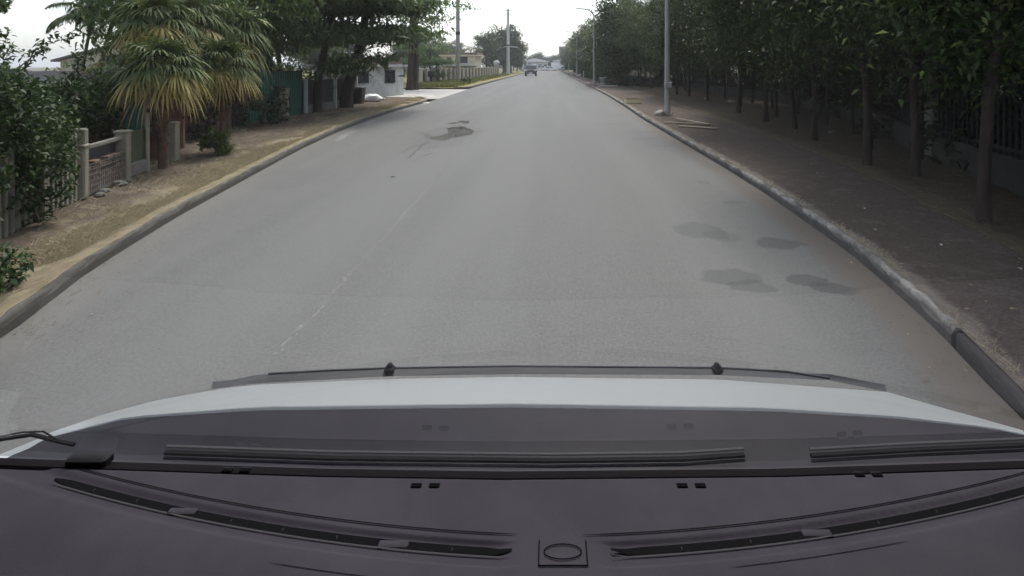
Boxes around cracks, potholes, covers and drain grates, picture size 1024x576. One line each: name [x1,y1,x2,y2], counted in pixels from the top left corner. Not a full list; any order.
pothole [430,126,475,141]
